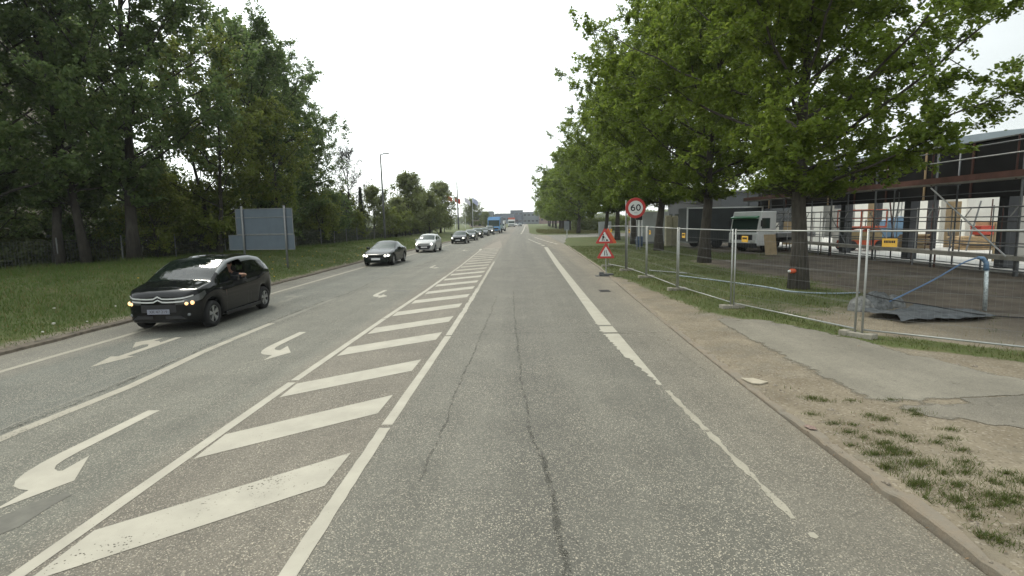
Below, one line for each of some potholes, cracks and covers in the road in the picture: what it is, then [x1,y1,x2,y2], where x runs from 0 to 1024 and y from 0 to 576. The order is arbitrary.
crack [419,302,701,481]
